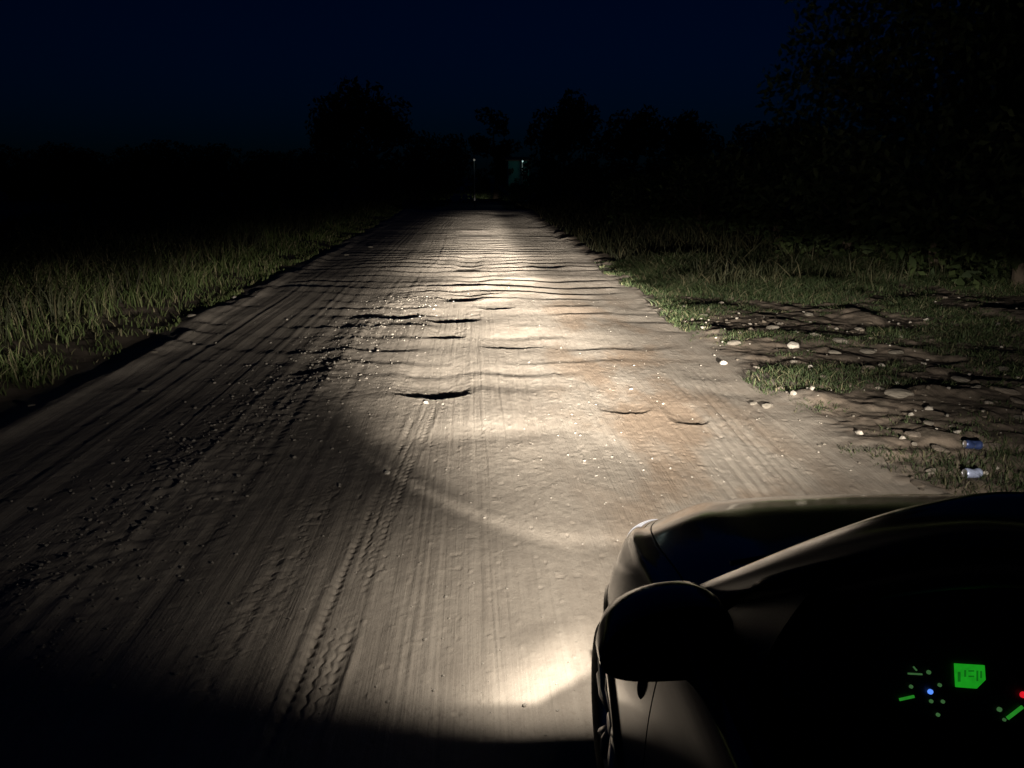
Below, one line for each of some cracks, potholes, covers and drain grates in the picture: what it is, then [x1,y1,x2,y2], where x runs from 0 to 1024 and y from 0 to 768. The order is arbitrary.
pothole [477,341,546,349]
pothole [597,404,653,415]
pothole [389,385,477,400]
pothole [667,414,711,425]
